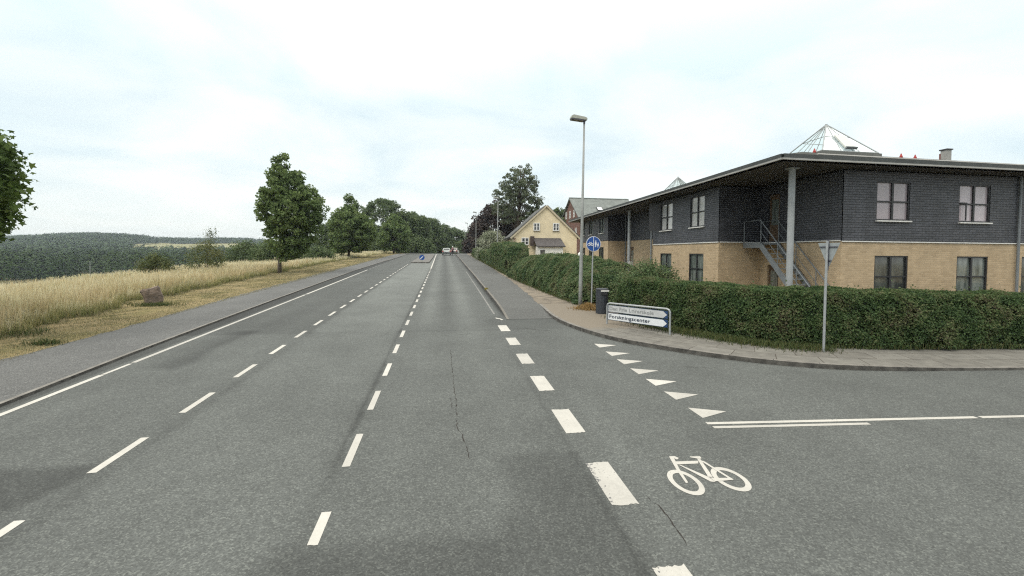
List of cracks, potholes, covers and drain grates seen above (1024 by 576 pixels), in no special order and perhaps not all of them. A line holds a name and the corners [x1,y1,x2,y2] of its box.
crack [450,334,470,459]
